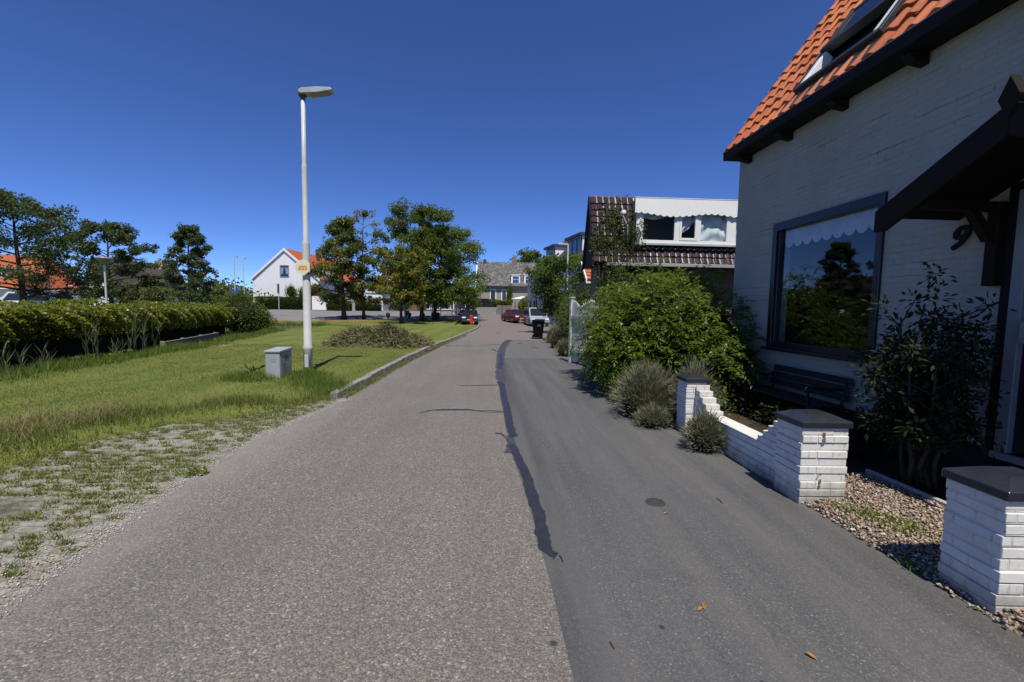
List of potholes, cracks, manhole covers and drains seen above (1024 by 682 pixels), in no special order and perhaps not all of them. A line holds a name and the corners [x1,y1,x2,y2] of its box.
manhole cover [645,498,665,507]
